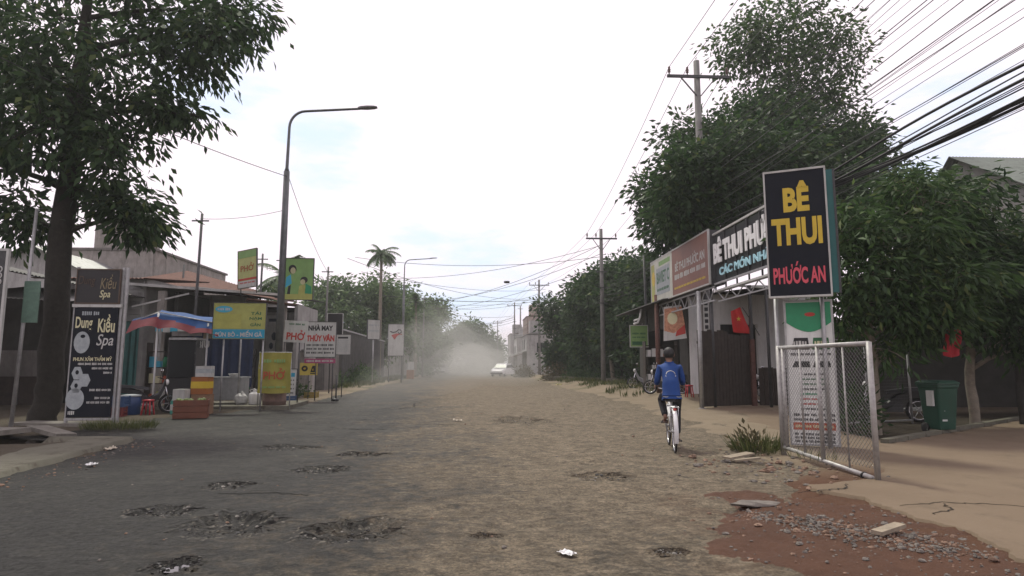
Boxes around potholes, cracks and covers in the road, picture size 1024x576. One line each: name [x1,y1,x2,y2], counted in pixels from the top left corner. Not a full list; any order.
pothole [117,504,212,518]
pothole [647,547,692,557]
pothole [283,465,355,475]
pothole [489,416,560,426]
crack [900,501,1024,514]
pothole [281,514,418,549]
pothole [567,470,642,482]
pothole [469,531,504,539]
pothole [202,480,264,491]
pothole [136,555,207,576]
pothole [150,509,303,542]
